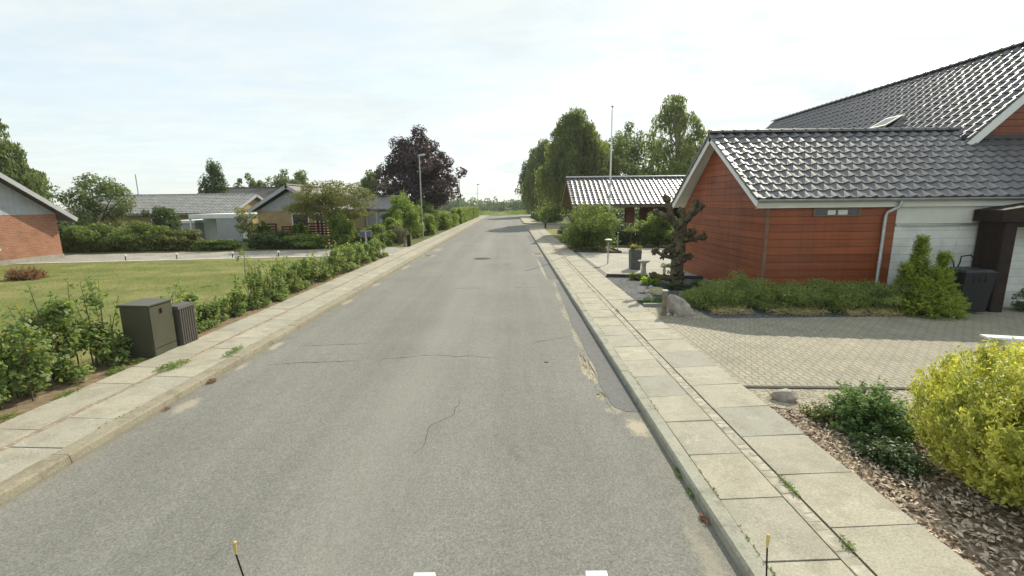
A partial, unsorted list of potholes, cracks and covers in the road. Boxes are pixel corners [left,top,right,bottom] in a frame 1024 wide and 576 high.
pothole [578,354,599,384]
crack [538,260,584,352]
